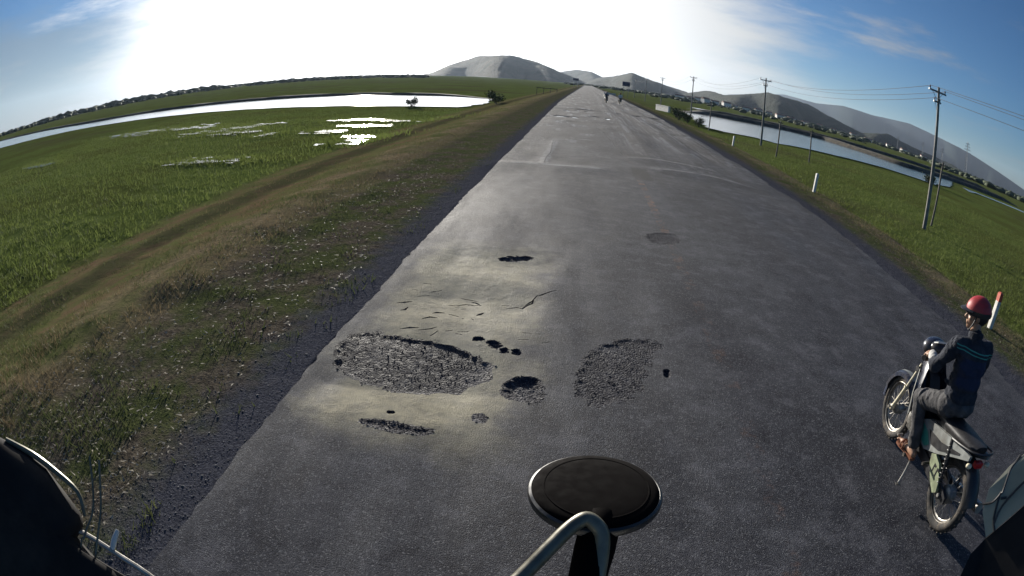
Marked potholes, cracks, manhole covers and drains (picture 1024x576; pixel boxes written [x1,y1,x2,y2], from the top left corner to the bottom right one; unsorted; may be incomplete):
pothole [358,418,436,436]
pothole [499,375,546,405]
crack [397,283,557,336]
pothole [571,338,665,410]
pothole [486,340,503,350]
pothole [471,413,489,423]
pothole [332,331,496,395]
